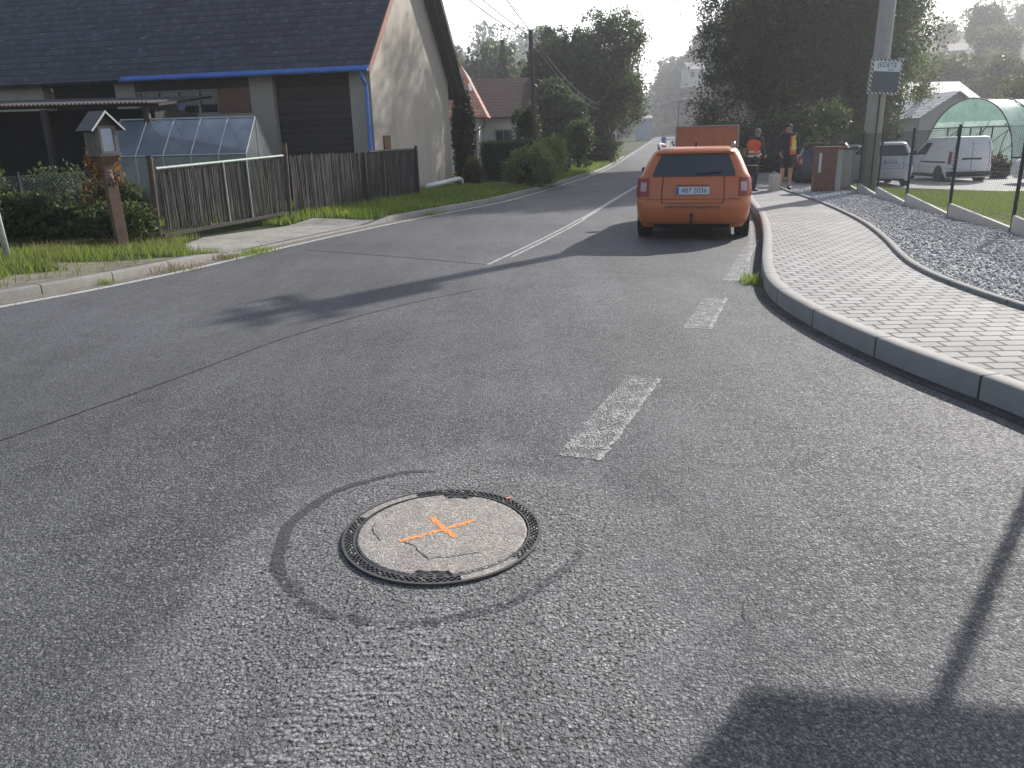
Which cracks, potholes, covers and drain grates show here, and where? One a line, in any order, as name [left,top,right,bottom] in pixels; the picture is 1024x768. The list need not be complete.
manhole cover [342,489,541,587]
